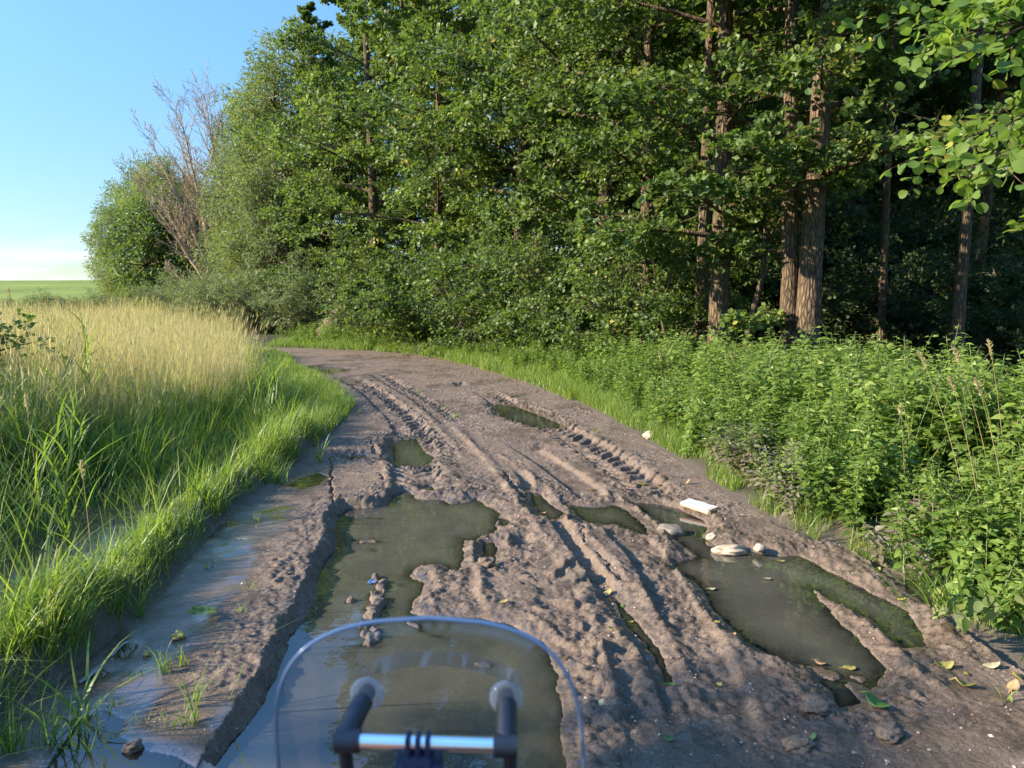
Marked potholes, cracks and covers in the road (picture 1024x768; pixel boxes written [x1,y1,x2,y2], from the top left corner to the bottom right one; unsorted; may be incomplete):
pothole [386,435,441,468]
pothole [189,484,582,768]
pothole [562,499,659,536]
pothole [492,403,565,429]
pothole [625,495,942,711]
